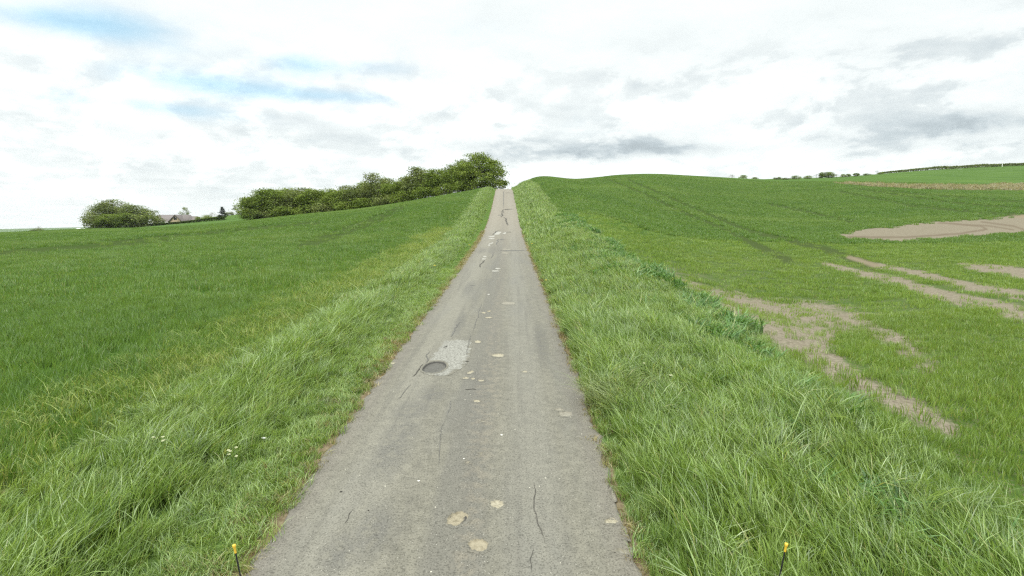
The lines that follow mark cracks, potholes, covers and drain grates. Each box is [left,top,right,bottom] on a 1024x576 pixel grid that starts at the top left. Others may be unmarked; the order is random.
crack [479,209,524,267]
crack [530,486,544,570]
